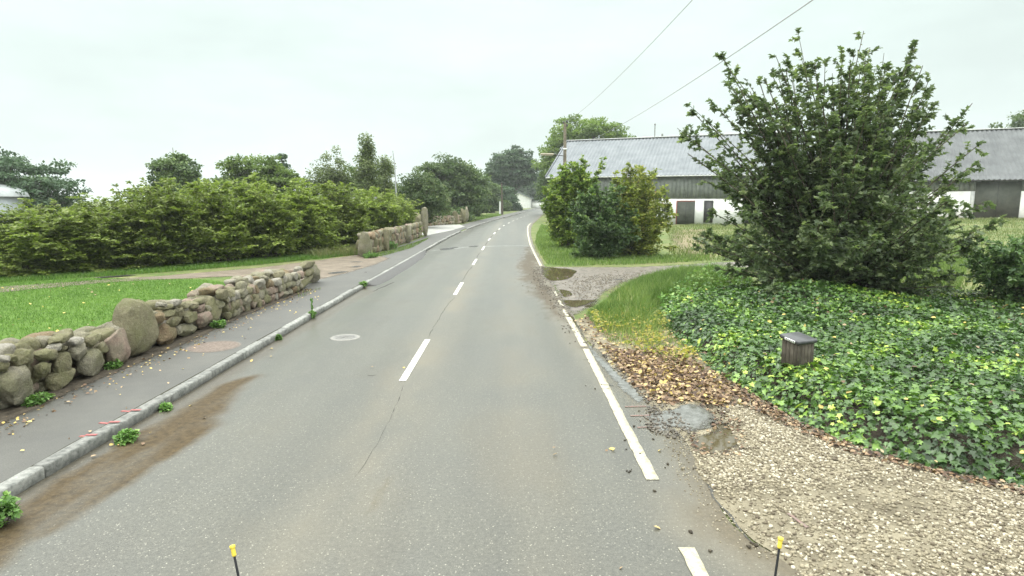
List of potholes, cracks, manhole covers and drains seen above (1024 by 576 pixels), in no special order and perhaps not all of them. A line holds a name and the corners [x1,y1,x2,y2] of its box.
pothole [647,404,718,432]
pothole [562,300,597,308]
pothole [541,267,577,281]
pothole [693,421,738,453]
